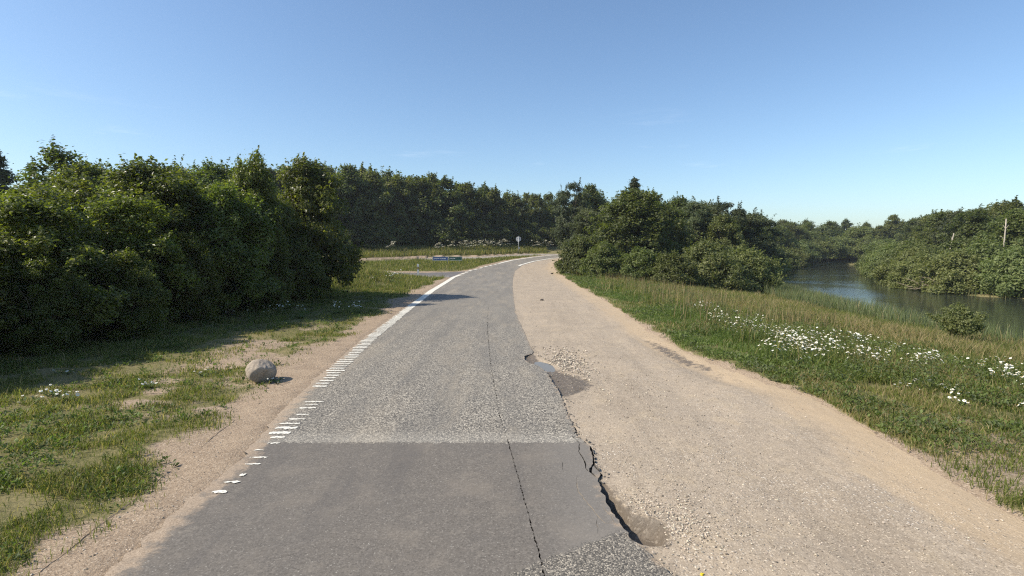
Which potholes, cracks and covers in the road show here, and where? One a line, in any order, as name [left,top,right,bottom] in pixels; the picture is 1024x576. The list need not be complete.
pothole [599,482,672,547]
pothole [524,354,598,398]
